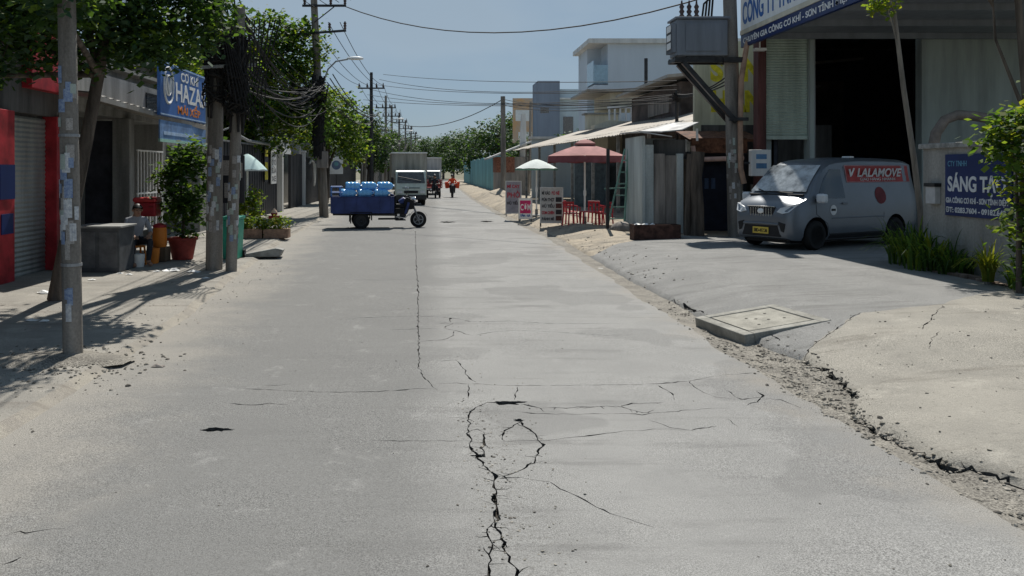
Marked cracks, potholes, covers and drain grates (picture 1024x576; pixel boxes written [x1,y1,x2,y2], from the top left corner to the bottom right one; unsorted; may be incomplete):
crack [853,420,1024,490]
manhole cover [695,304,831,345]
crack [803,314,865,399]
crack [232,231,608,405]
crack [382,360,798,576]
